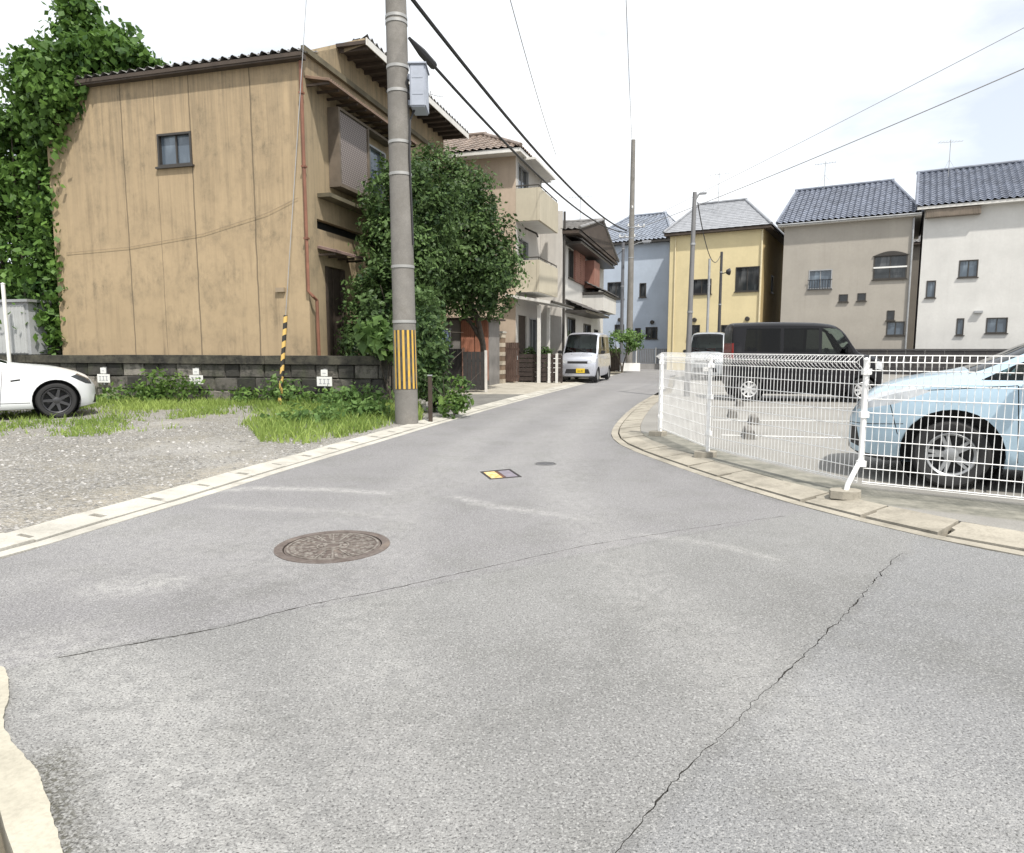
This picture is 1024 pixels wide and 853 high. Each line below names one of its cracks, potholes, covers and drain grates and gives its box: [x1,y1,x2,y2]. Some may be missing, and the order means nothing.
manhole cover [274,530,390,564]
crack [615,553,903,853]
utility cover [480,469,522,480]
